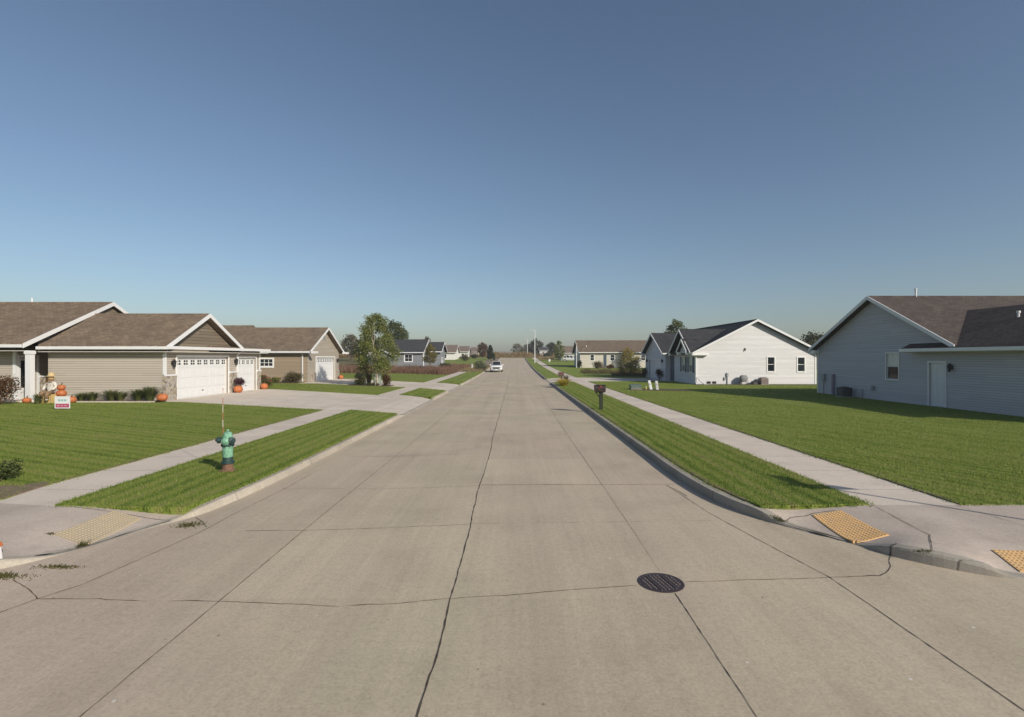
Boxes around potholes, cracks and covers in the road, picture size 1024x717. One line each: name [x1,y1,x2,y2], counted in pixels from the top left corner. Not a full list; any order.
manhole cover [638,573,685,593]
crack [1,580,635,612]
